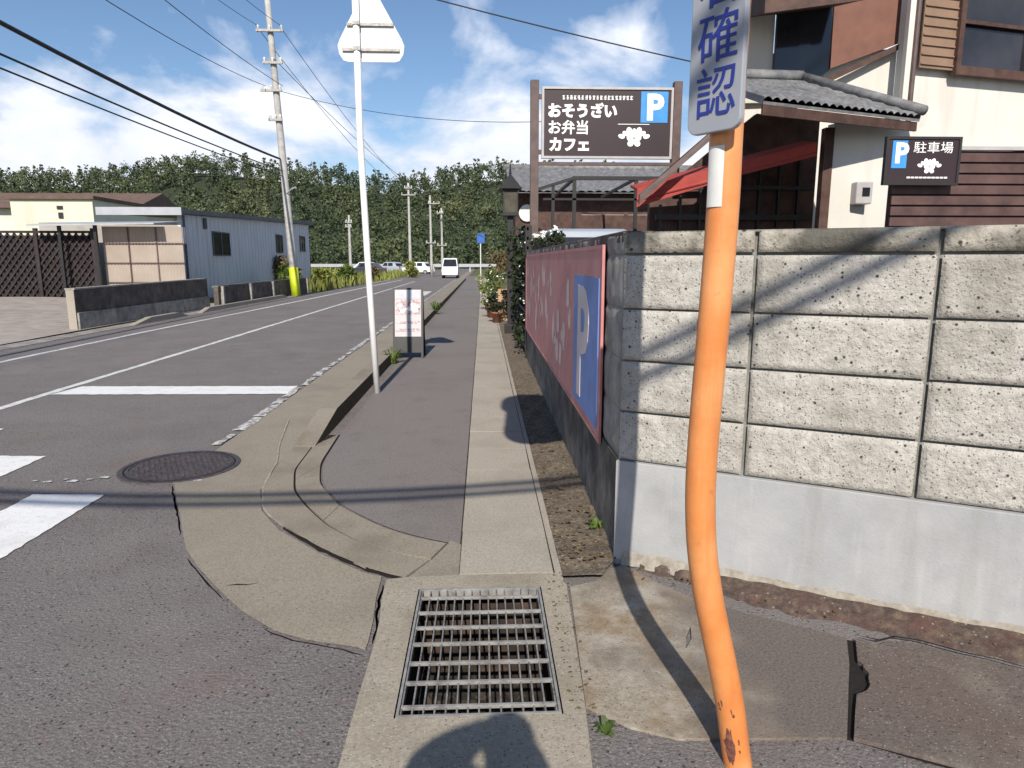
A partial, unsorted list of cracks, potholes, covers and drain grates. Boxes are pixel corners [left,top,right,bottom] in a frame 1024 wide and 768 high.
crack [265,527,402,655]
manhole cover [116,451,241,485]
crack [847,636,1023,768]
drain grate [395,586,562,718]
crack [172,486,181,536]
